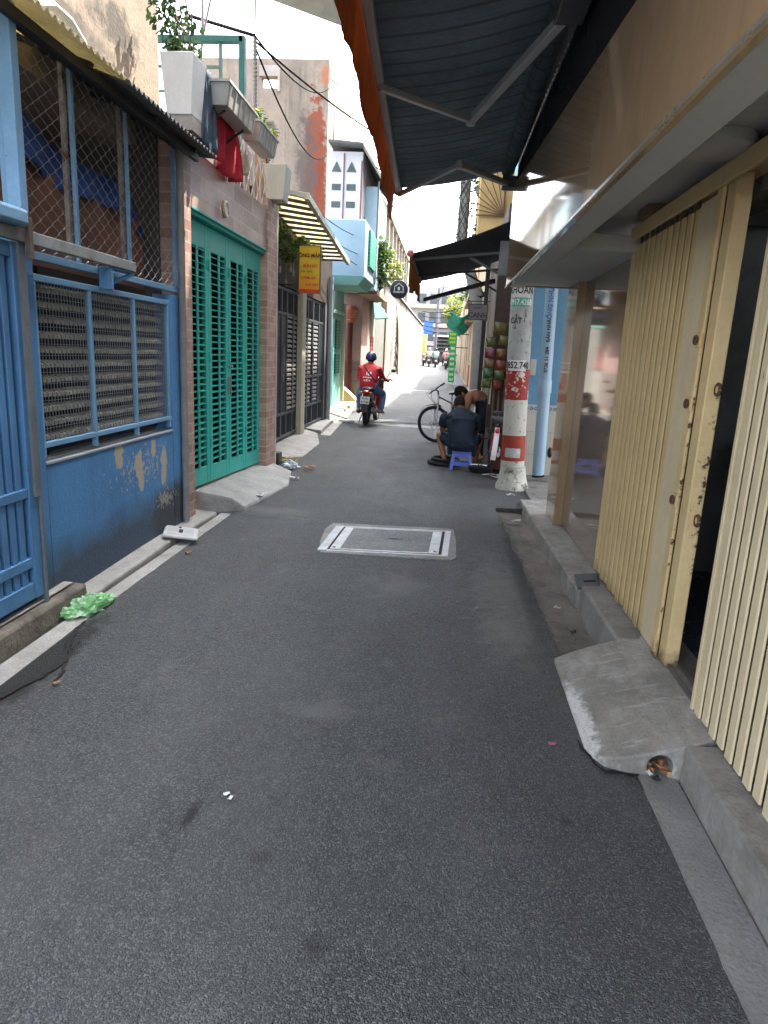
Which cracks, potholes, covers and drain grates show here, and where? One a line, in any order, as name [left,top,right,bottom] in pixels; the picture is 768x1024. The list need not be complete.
manhole cover [317,523,456,561]
